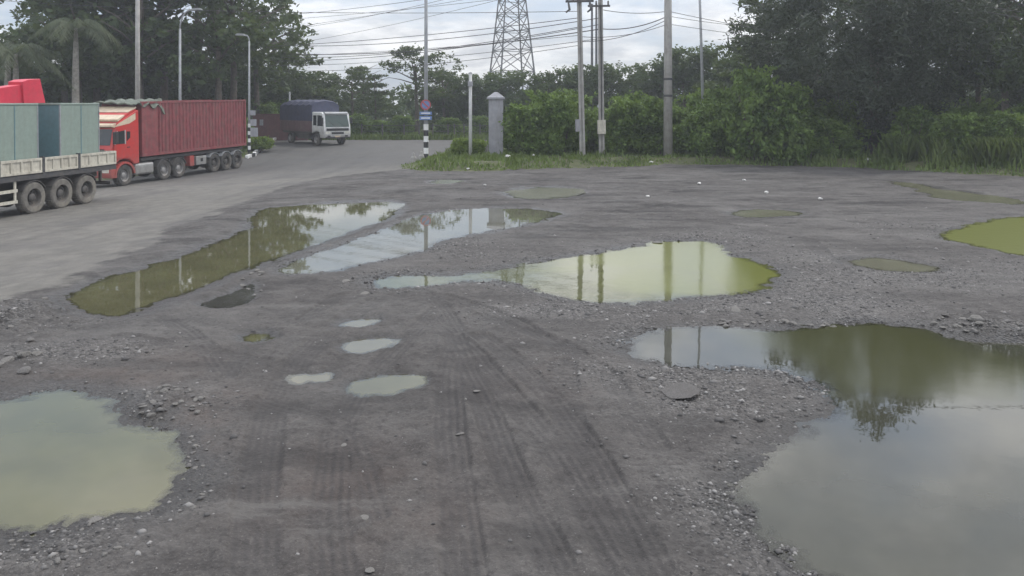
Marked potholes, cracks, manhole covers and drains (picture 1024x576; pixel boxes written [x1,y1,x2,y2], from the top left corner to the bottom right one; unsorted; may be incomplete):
pothole [360,239,790,306]
pothole [835,256,949,273]
pothole [277,206,563,275]
pothole [615,318,1024,576]
pothole [46,200,405,319]
pothole [0,383,205,551]
pothole [502,185,586,199]
pothole [886,181,1024,205]
pothole [339,334,400,354]
pothole [341,372,429,397]
pothole [237,329,277,344]
pothole [725,209,807,218]
